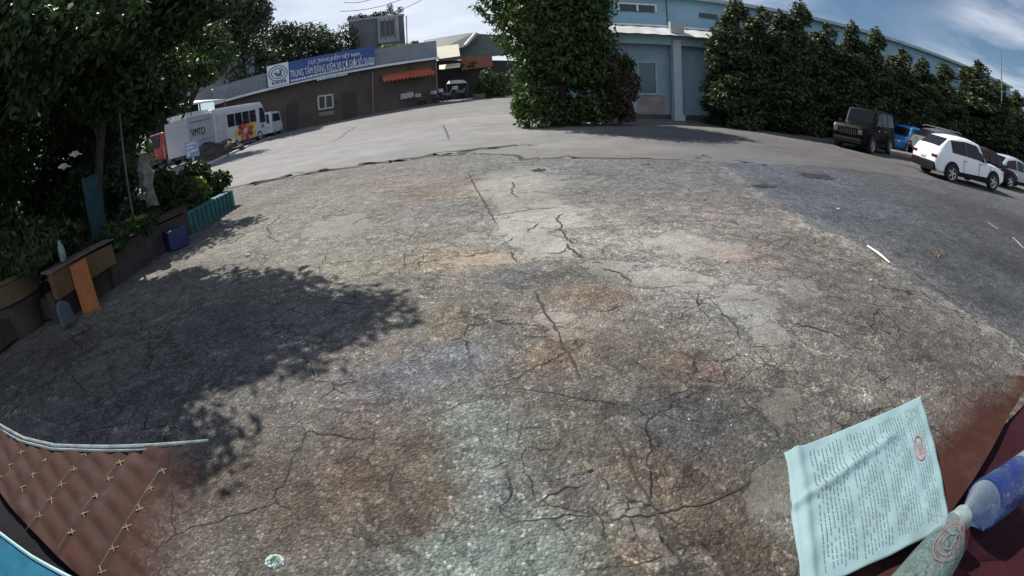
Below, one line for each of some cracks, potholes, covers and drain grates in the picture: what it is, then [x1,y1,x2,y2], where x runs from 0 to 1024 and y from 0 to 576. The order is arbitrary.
crack [916,274,1011,335]
crack [224,144,713,289]
crack [708,296,771,368]
crack [571,471,752,541]
